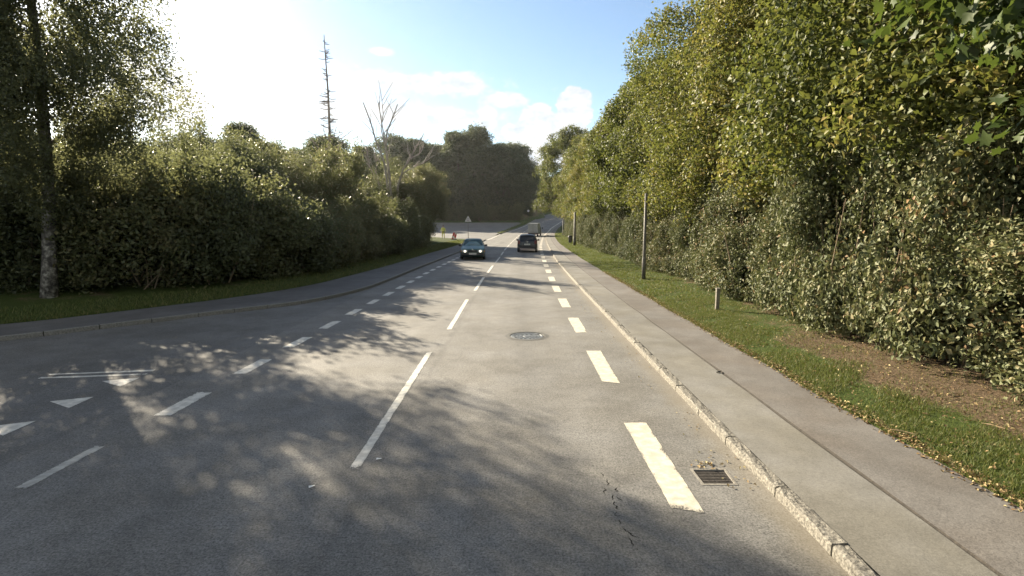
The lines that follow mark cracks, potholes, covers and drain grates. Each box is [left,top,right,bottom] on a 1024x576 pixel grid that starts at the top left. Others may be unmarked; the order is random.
manhole cover [506,331,549,341]
drain grate [690,468,738,485]
